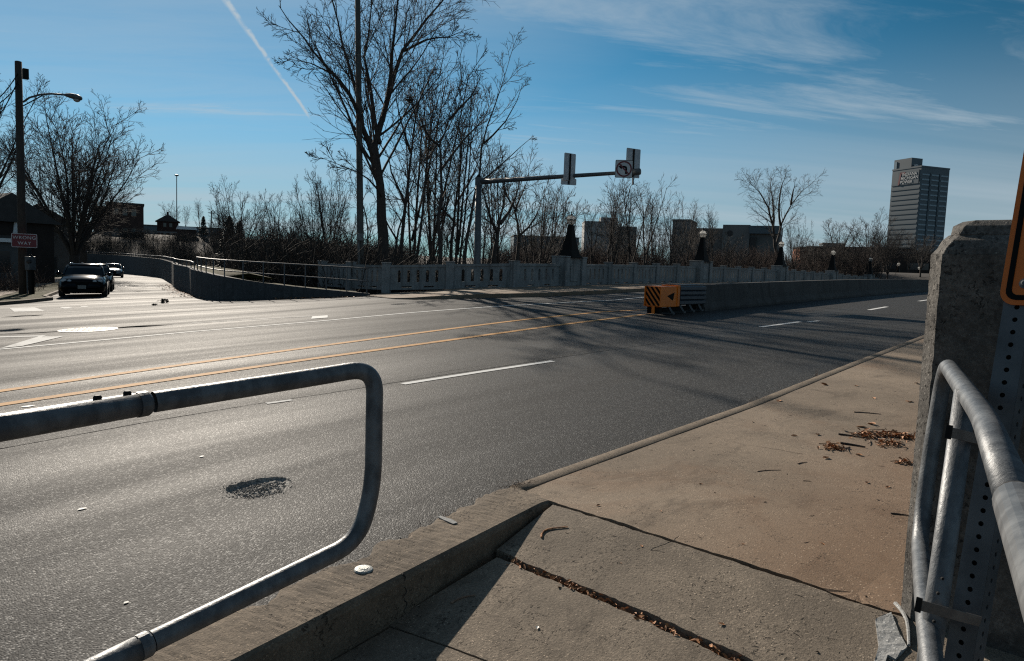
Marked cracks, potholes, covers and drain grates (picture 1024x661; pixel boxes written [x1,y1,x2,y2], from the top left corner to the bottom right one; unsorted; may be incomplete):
pothole [222,476,298,499]
